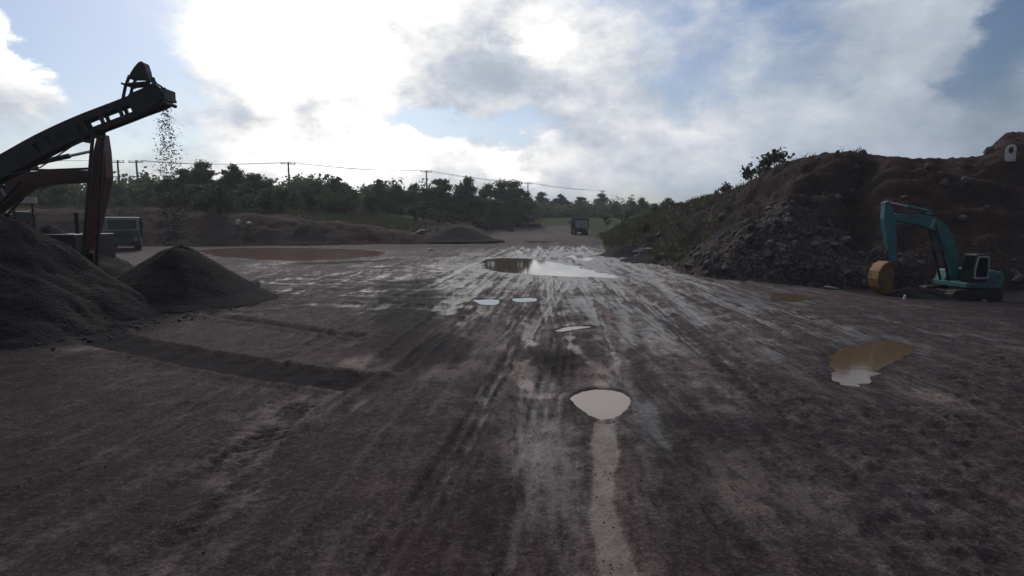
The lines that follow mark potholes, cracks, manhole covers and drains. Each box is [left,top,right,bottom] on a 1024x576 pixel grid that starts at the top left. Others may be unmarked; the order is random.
pothole [468,298,505,306]
pothole [559,385,645,424]
pothole [549,325,600,333]
